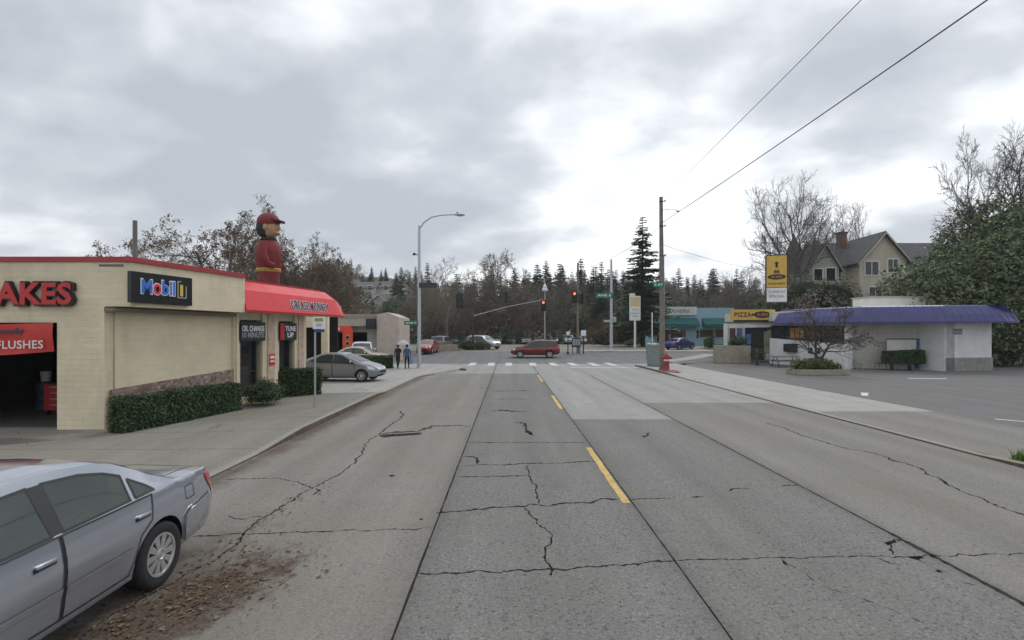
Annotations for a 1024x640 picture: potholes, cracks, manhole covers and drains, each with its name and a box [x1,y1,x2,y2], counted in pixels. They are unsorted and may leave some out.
crack [75,409,1024,639]
